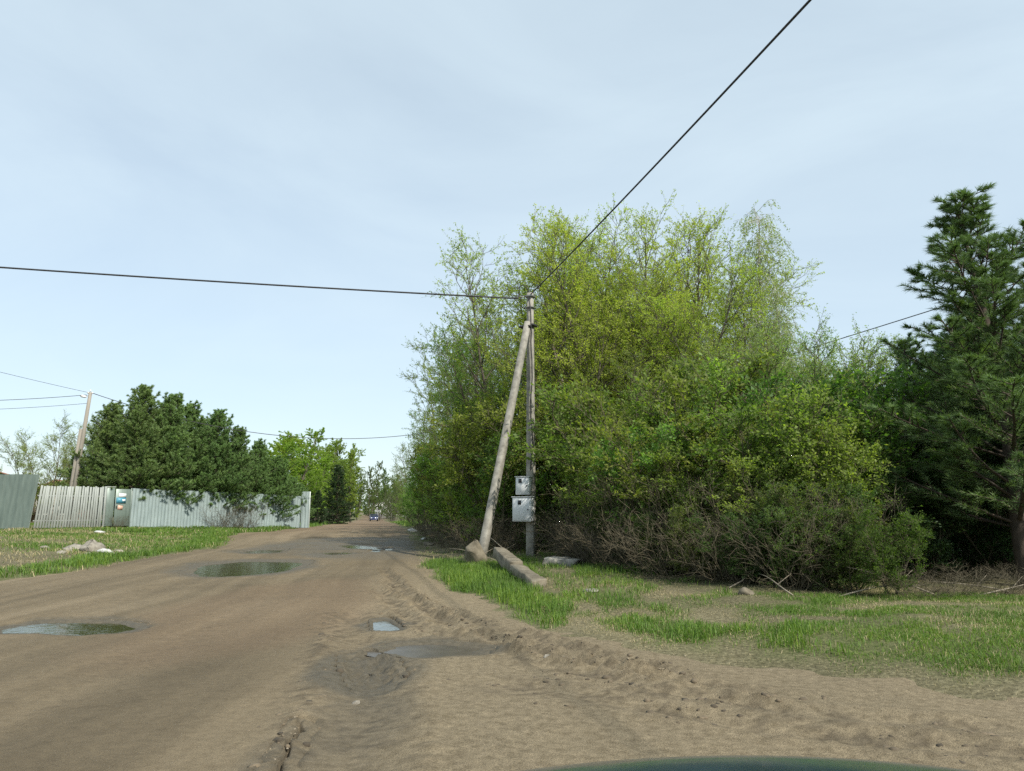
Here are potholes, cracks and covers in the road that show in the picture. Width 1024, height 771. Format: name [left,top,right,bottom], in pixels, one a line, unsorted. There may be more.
pothole [336,648,409,696]
pothole [366,639,499,659]
pothole [0,618,151,636]
pothole [178,559,315,578]
pothole [368,617,404,631]
